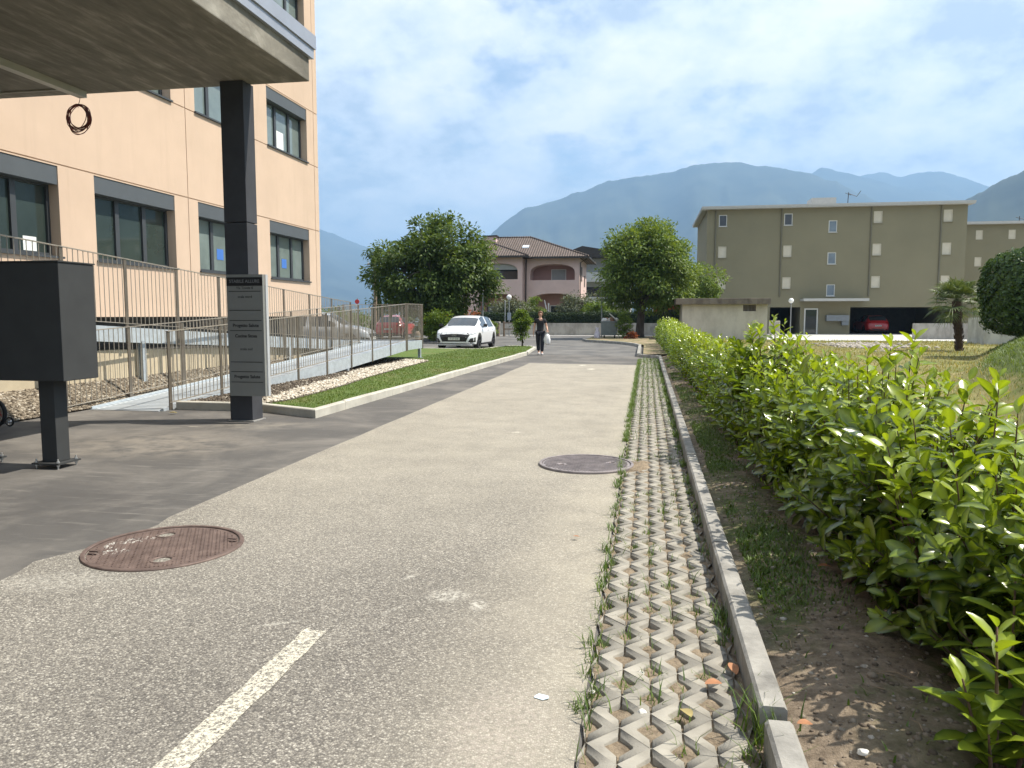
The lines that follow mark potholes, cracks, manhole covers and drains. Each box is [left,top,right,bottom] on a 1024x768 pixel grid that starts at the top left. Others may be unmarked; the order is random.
manhole cover [79,525,244,572]
manhole cover [539,454,634,475]
